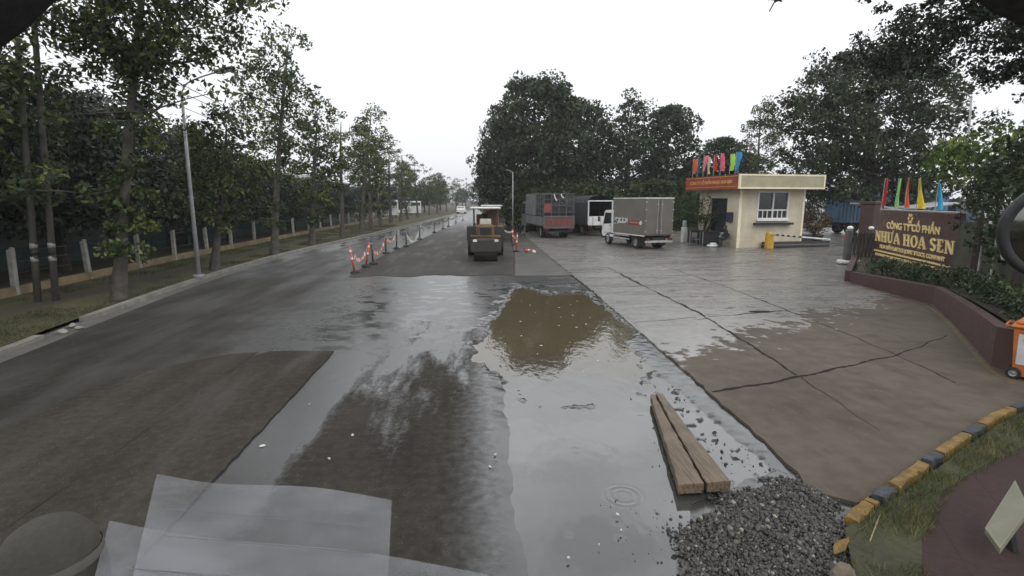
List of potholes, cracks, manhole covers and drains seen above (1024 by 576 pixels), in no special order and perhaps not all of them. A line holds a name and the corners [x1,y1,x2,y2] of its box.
pothole [462,284,671,417]
crack [600,267,955,426]
